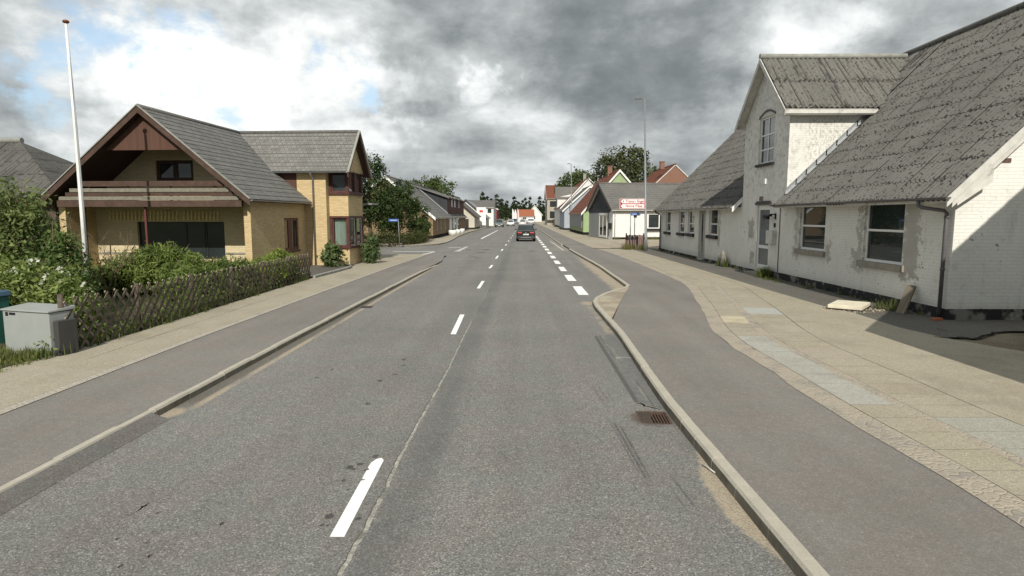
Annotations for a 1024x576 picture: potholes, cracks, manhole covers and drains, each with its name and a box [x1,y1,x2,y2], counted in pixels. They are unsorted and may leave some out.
drain grate [635,411,672,424]
crack [934,328,1024,339]
